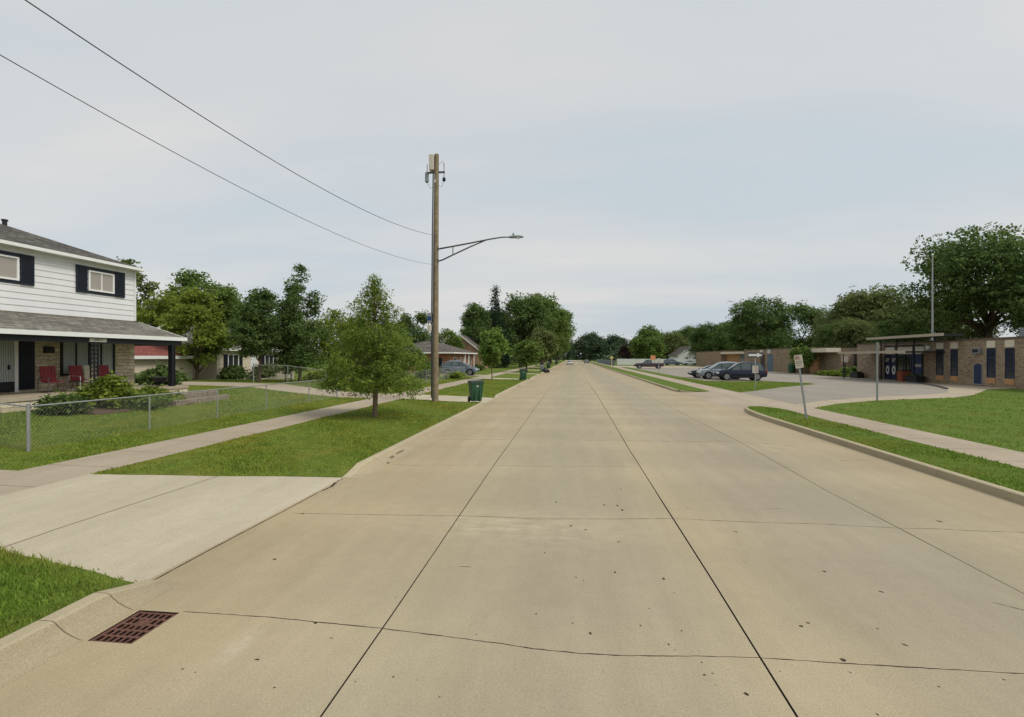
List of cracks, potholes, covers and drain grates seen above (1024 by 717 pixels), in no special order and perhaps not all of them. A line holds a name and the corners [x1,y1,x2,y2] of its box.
drain grate [88,610,178,644]
